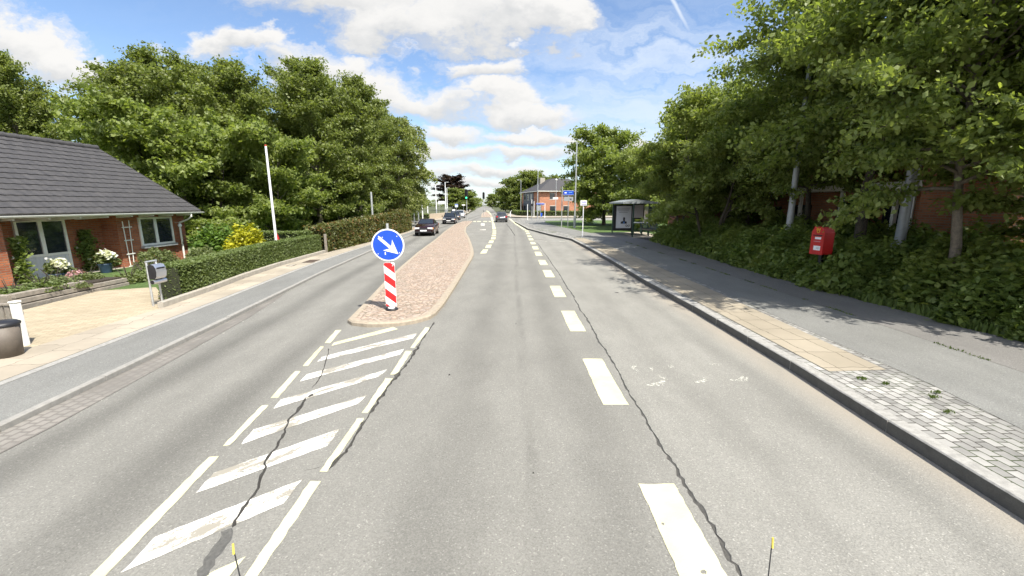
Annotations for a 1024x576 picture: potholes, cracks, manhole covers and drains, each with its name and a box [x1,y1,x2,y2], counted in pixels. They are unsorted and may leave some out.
crack [197,322,435,576]
crack [537,243,742,576]
